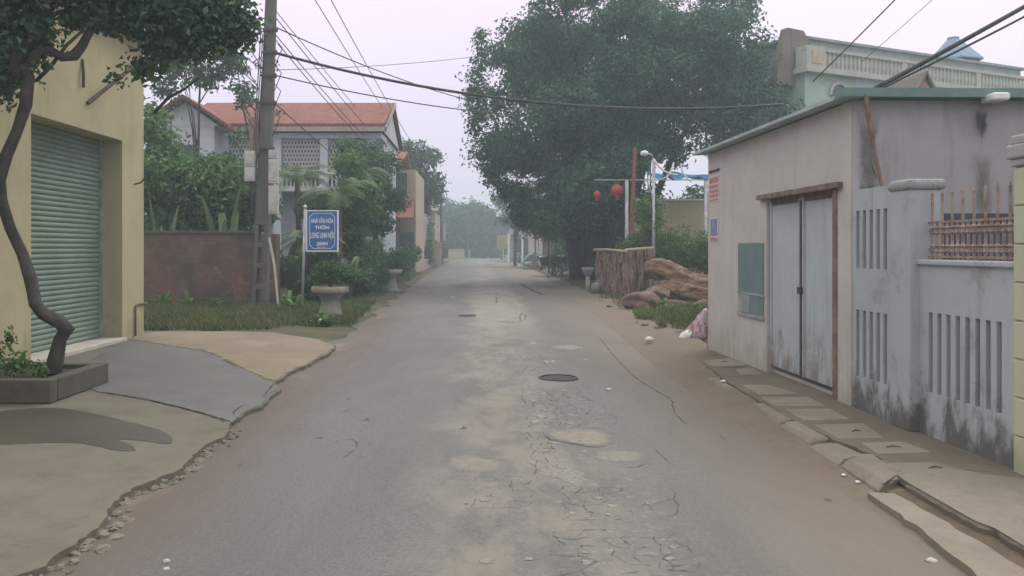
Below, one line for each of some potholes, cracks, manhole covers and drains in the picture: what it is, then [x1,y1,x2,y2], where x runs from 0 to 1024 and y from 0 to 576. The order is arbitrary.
crack [470,386,694,576]
manhole cover [538,374,579,382]
